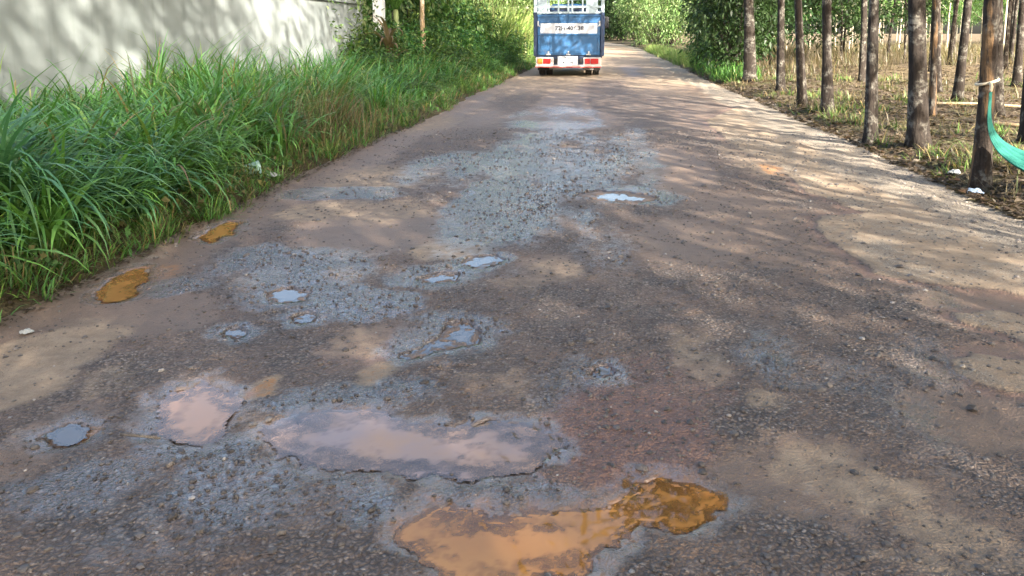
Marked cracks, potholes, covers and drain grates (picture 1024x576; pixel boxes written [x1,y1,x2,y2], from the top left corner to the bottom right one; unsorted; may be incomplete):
pothole [573,191,657,205]
pothole [270,410,563,483]
pothole [95,268,149,304]
pothole [292,314,316,324]
pothole [419,274,459,283]
pothole [396,477,727,576]
pothole [225,329,246,339]
pothole [590,366,616,378]
pothole [41,424,90,448]
pothole [399,321,482,360]
pothole [197,222,239,243]
pothole [157,385,245,445]
